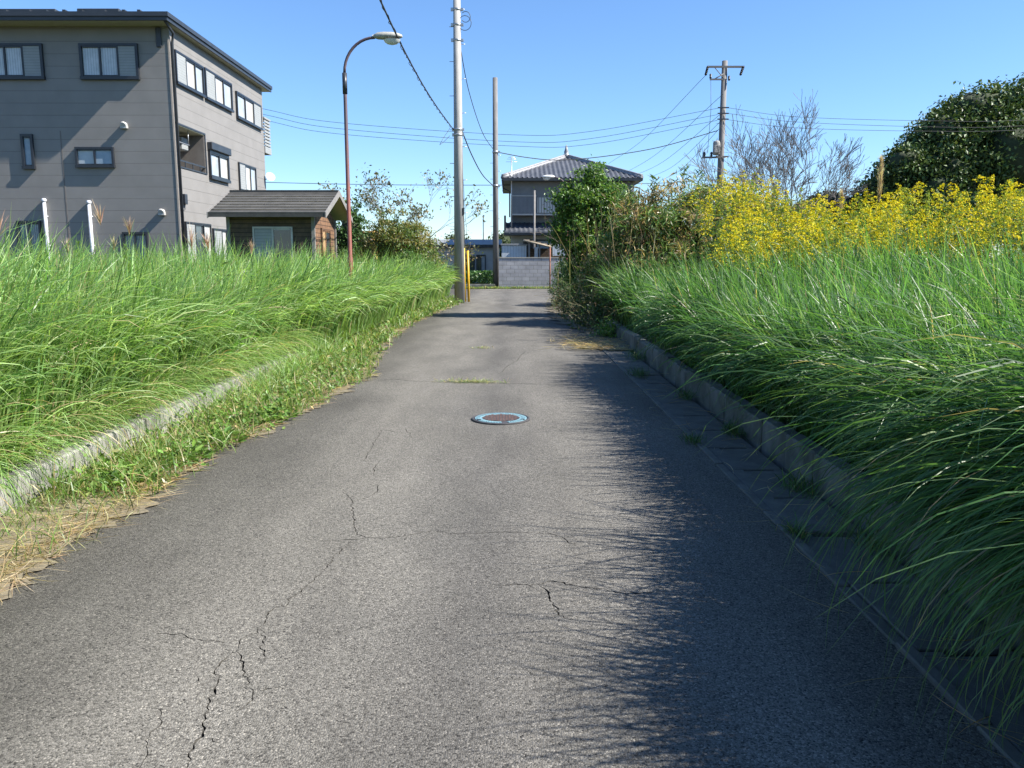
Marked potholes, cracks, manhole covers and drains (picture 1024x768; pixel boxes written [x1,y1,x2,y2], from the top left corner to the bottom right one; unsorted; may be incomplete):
manhole cover [472,412,530,425]
crack [152,430,575,768]
crack [129,710,162,767]
crack [499,581,661,620]
